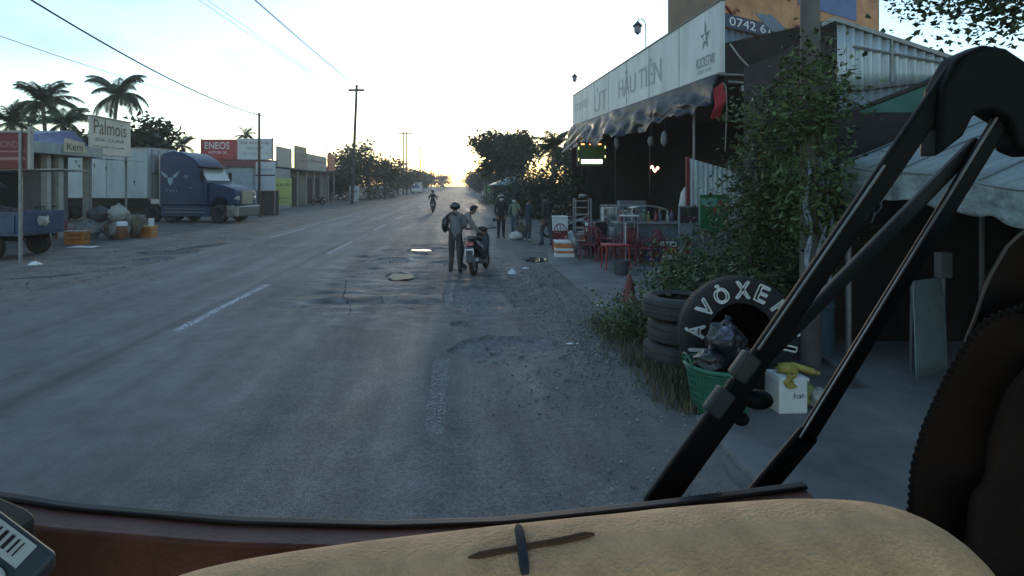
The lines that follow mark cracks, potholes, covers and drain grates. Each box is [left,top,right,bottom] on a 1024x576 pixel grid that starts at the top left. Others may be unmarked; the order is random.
pothole [446,335,568,366]
crack [342,281,426,314]
